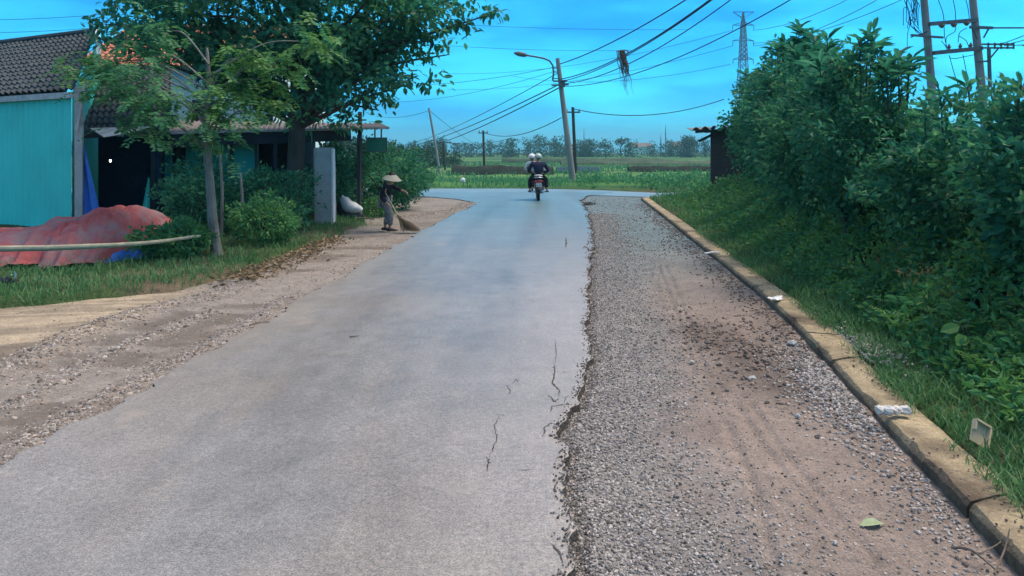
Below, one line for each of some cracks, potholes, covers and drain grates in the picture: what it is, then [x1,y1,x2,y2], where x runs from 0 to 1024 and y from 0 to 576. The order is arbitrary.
crack [542,344,572,436]
